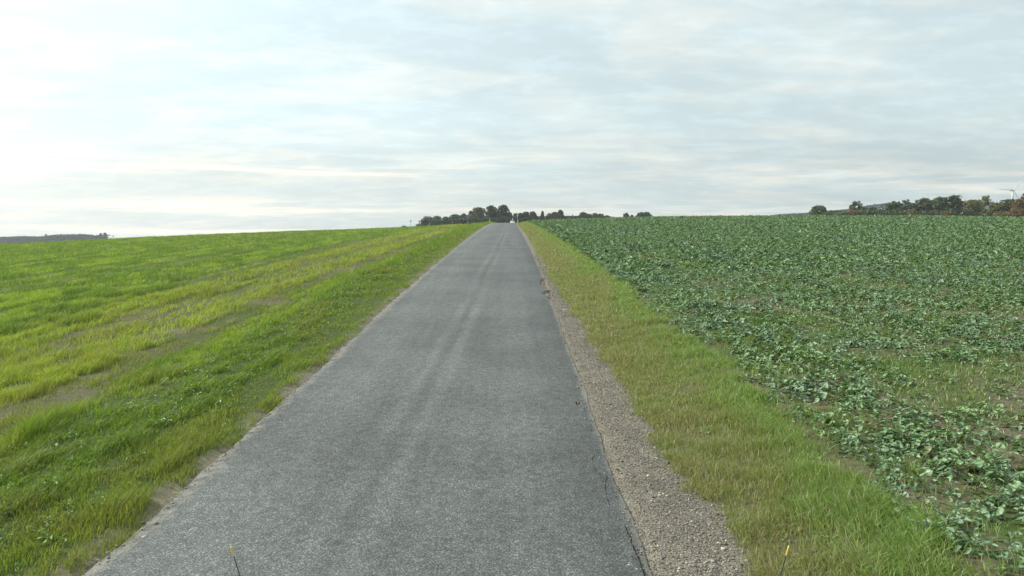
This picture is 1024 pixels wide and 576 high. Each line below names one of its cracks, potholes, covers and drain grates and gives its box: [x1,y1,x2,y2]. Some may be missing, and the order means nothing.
crack [625,527,645,576]
